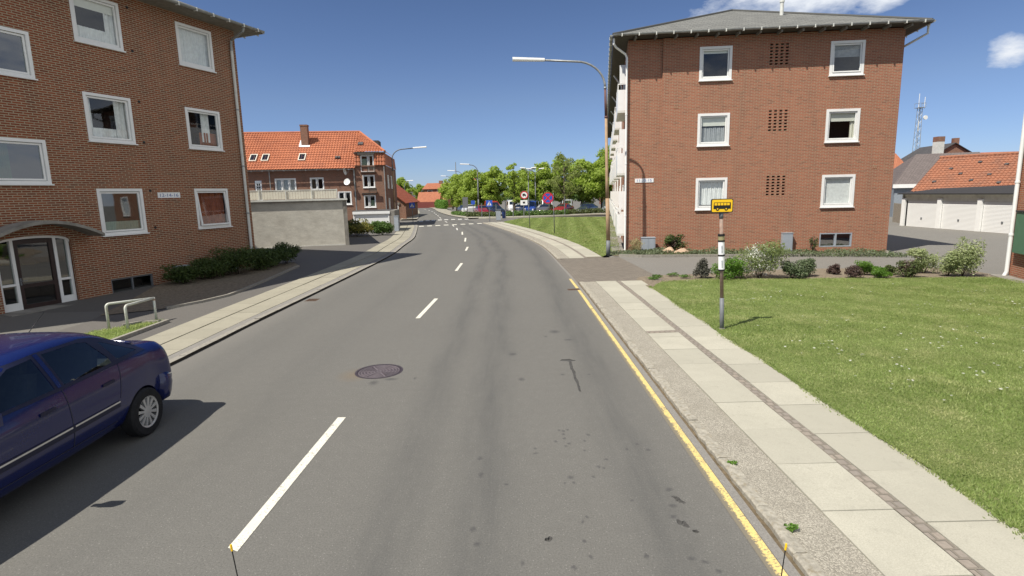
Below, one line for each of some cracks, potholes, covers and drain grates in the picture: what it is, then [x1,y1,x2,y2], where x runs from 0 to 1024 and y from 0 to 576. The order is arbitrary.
manhole cover [355,364,403,379]
crack [561,359,581,392]
